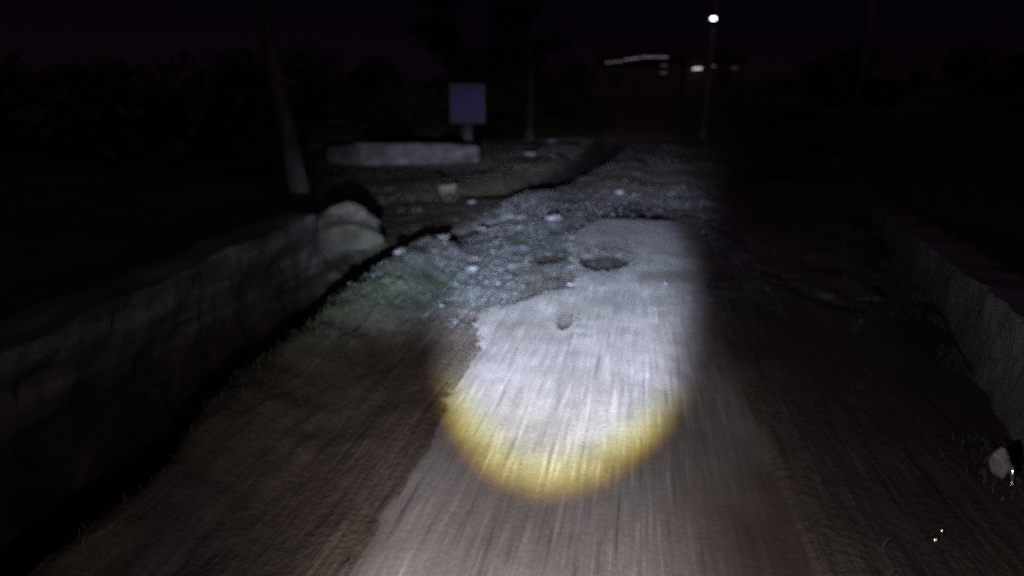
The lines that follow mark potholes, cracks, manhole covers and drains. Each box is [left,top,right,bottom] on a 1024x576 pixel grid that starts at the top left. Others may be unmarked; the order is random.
pothole [572,240,641,276]
pothole [550,306,581,337]
pothole [529,250,569,266]
